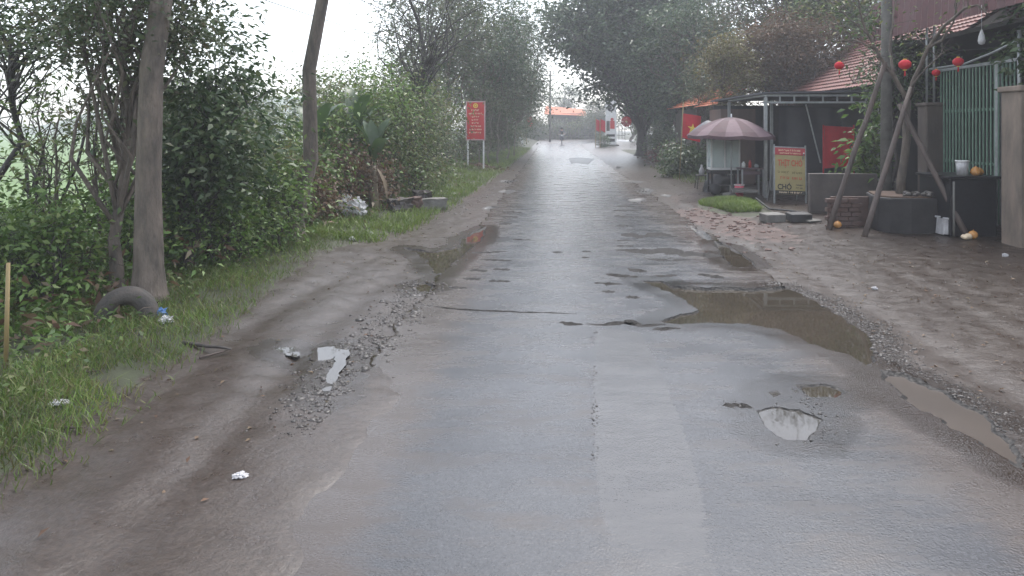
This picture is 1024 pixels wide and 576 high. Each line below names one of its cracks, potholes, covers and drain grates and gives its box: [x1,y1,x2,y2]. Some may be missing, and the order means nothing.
pothole [757,406,824,441]
crack [430,206,681,331]
pothole [414,282,434,292]
pothole [640,280,877,367]
pothole [796,384,849,398]
pothole [880,369,1024,469]
pothole [404,227,487,275]
